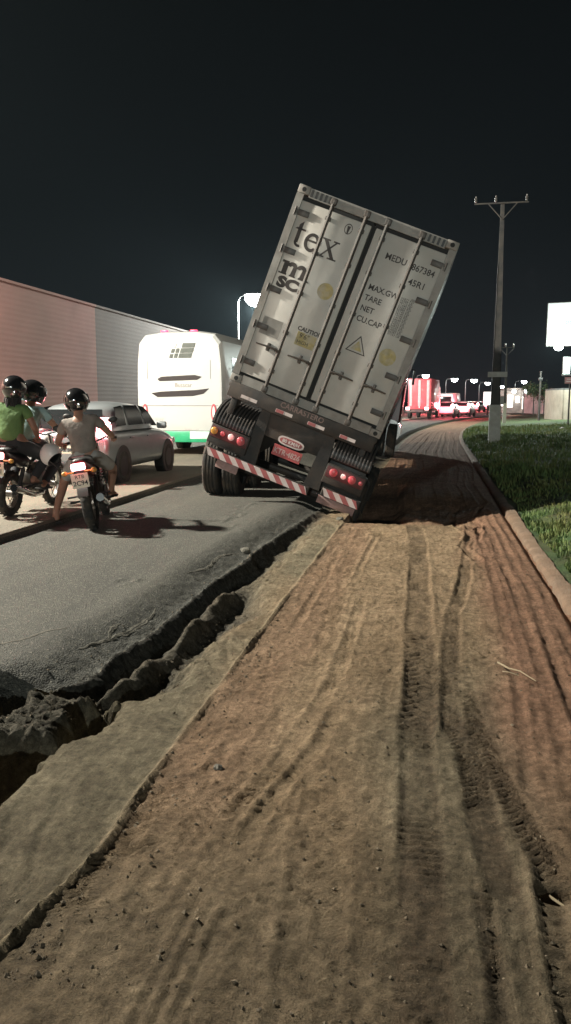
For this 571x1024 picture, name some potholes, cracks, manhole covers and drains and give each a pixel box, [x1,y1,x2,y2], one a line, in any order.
crack [188,553,239,573]
